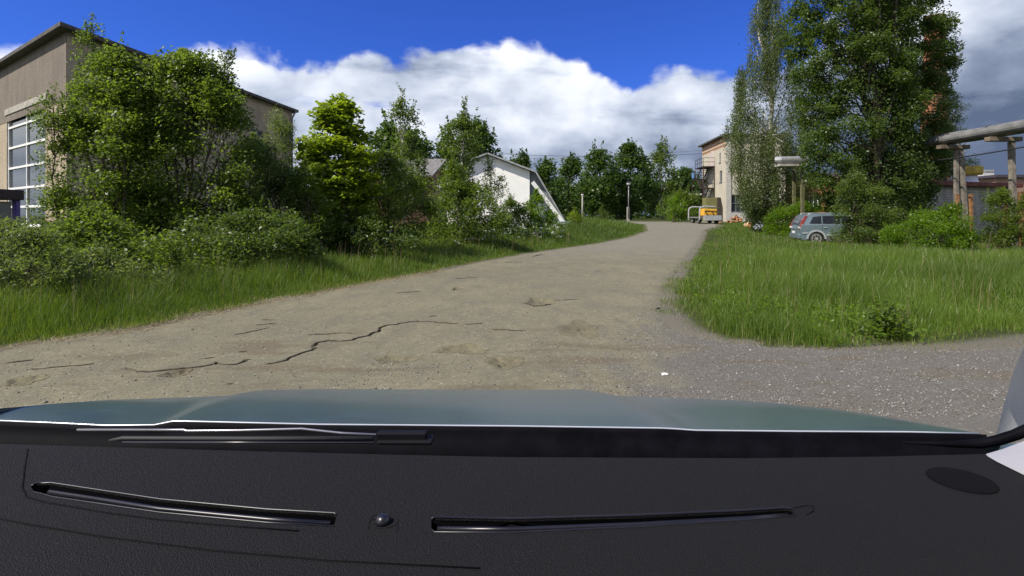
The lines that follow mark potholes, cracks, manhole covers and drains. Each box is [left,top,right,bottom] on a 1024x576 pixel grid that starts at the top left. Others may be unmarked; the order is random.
pothole [157,368,193,378]
crack [125,316,526,384]
crack [7,359,94,370]
pothole [525,297,556,306]
pothole [484,356,525,369]
pothole [557,319,600,339]
pothole [433,343,490,354]
